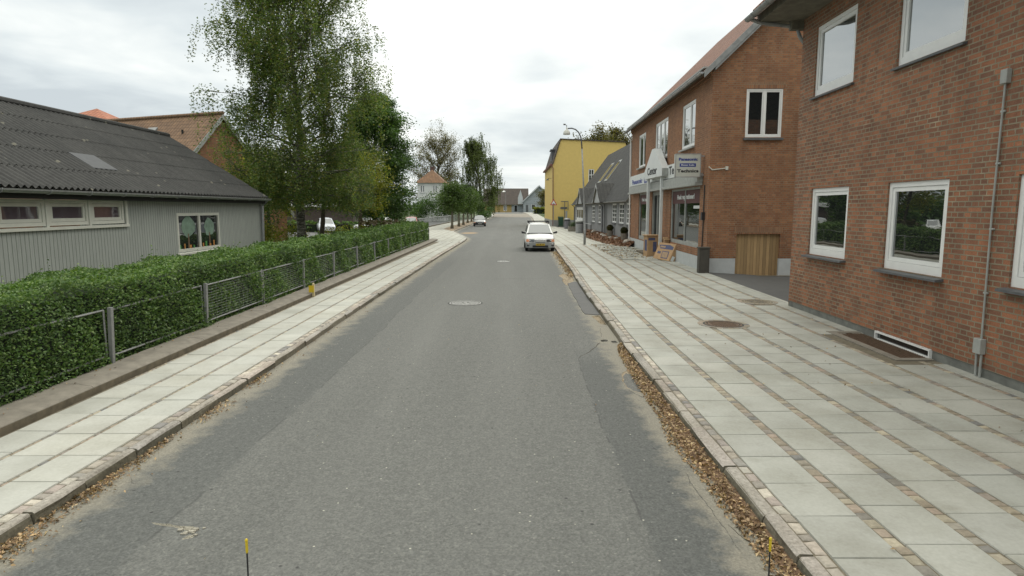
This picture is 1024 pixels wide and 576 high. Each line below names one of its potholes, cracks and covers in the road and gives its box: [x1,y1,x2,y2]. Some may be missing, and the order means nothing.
drain grate [826,331,935,361]
manhole cover [697,320,750,329]
